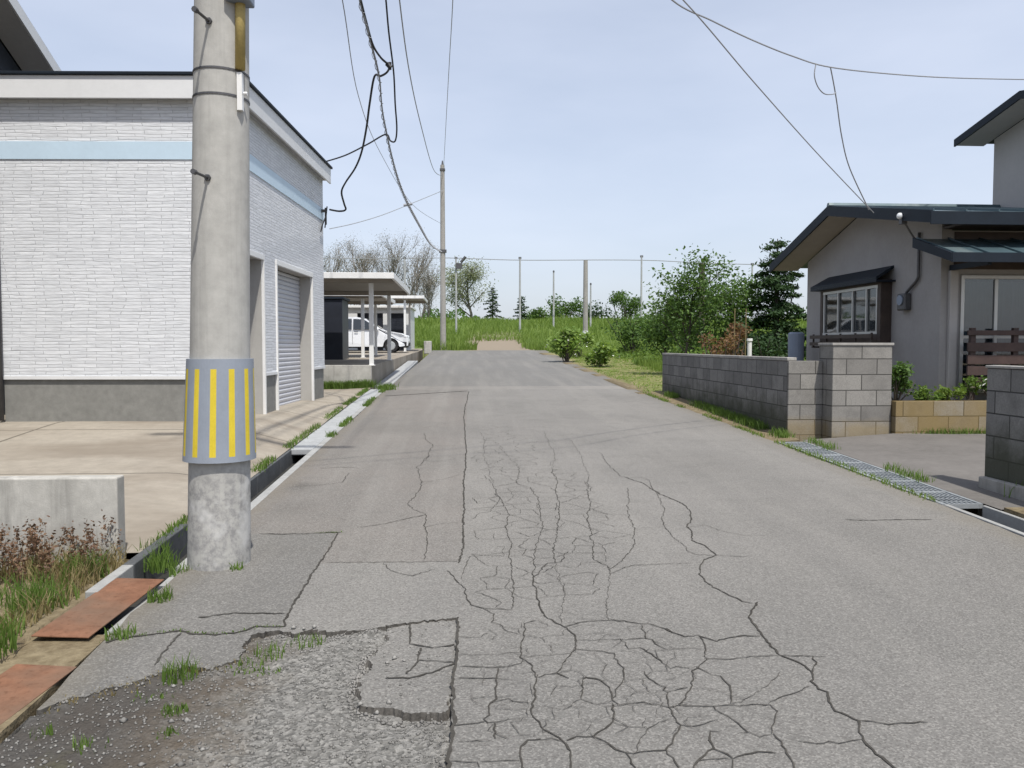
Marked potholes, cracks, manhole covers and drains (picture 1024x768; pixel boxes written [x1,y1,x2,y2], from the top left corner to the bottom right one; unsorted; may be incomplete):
drain grate [880,480,946,492]
crack [106,612,285,665]
crack [445,617,460,768]
pothole [177,620,457,768]
crack [450,427,924,768]
drain grate [855,471,914,481]
drain grate [910,491,983,509]
drain grate [812,455,862,463]
drain grate [832,462,887,472]
